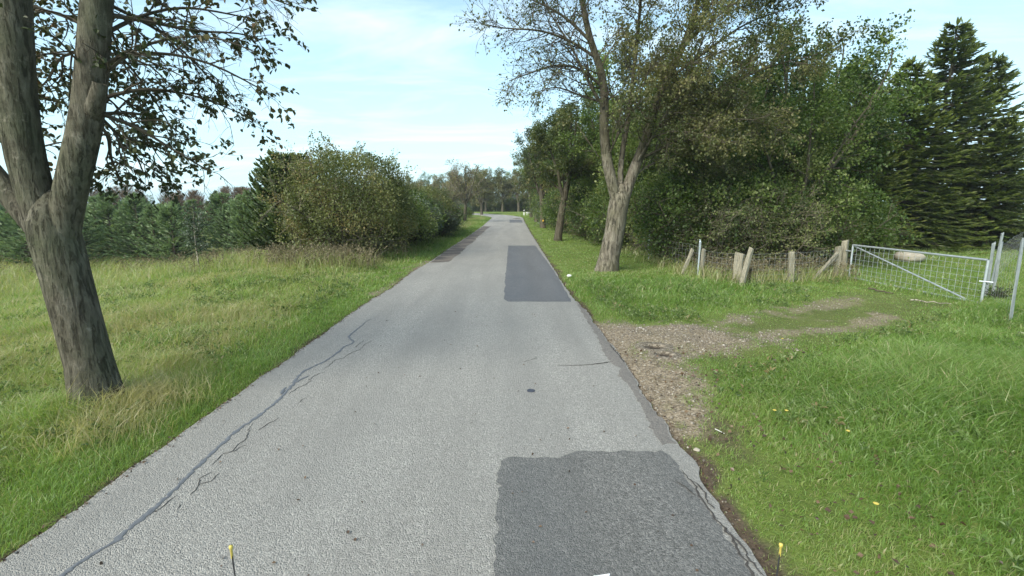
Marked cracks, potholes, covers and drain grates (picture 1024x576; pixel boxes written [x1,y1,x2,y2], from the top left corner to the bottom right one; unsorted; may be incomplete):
crack [152,418,278,513]
